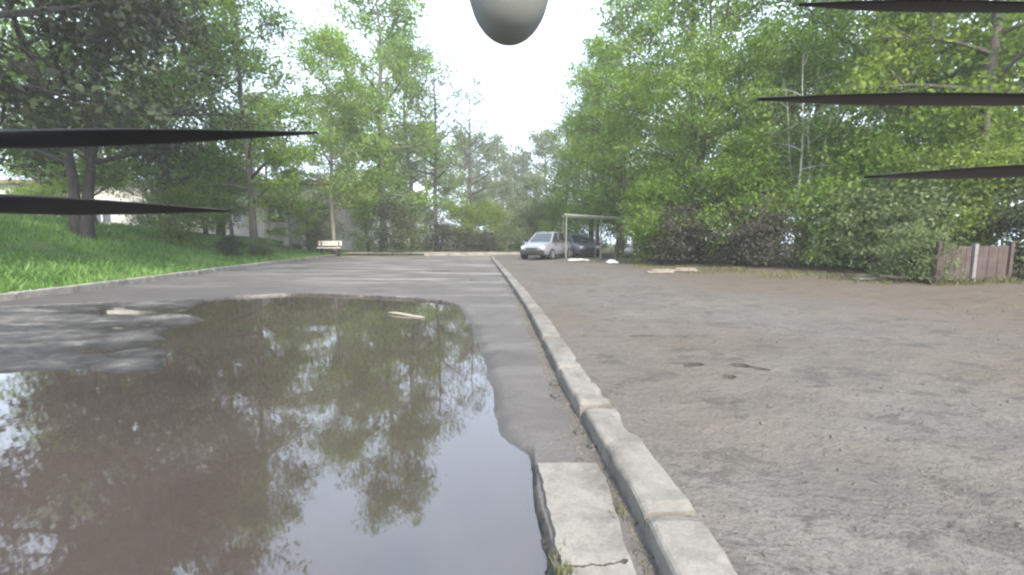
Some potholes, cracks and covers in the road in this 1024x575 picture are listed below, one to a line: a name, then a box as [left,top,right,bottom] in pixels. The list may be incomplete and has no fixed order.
pothole [0,293,555,575]
crack [565,558,628,568]
